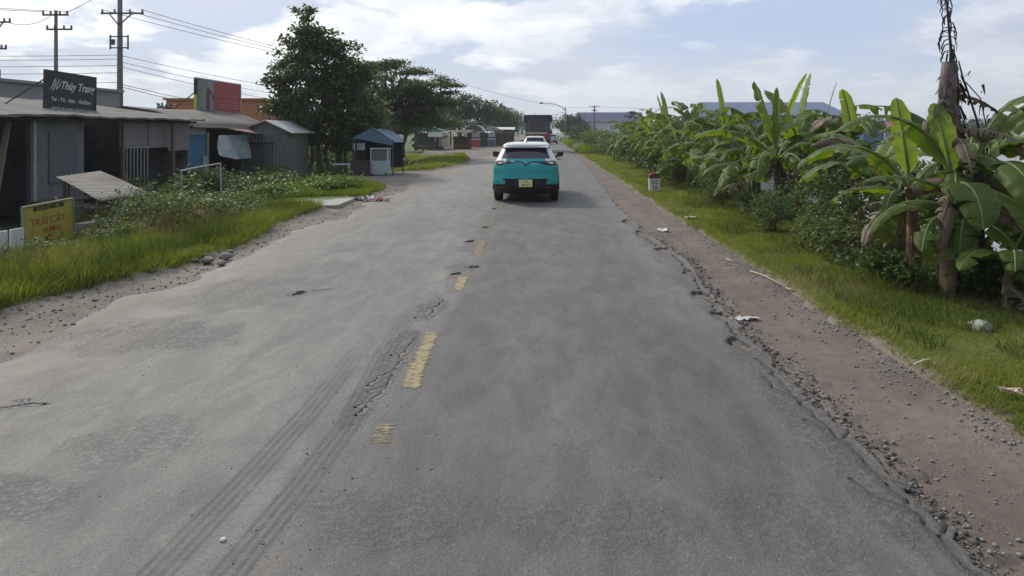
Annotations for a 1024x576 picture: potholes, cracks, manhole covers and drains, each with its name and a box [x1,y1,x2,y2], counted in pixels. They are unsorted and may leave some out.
crack [415,299,447,318]
crack [0,398,47,410]
pothole [722,335,757,352]
crack [353,338,419,416]
